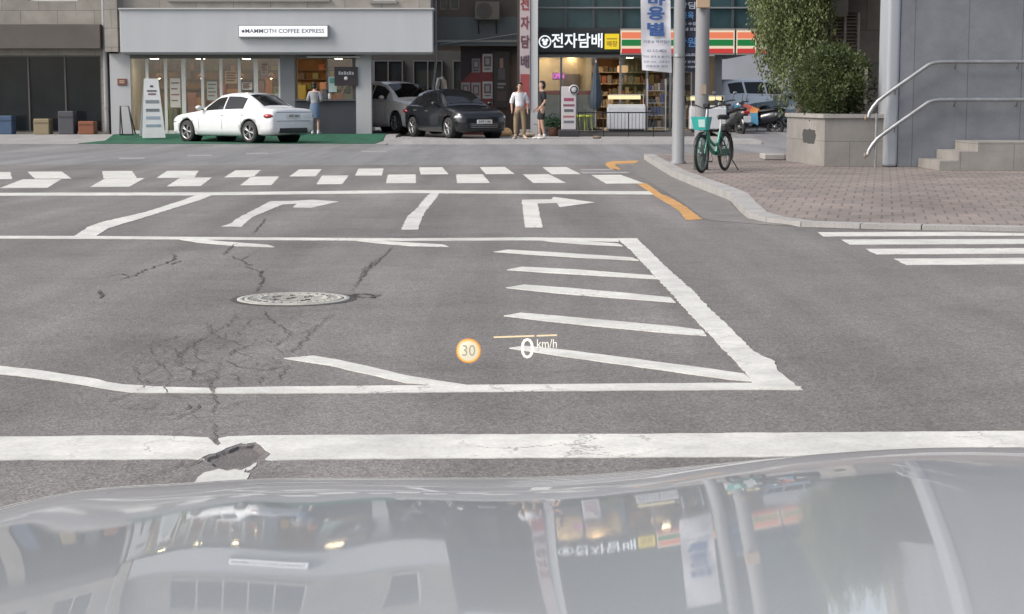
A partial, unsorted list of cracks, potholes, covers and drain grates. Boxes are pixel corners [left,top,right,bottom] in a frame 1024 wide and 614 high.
crack [107,309,337,481]
crack [223,219,270,291]
crack [350,247,391,297]
crack [98,254,181,298]
pothole [207,445,266,470]
manhole cover [230,292,357,306]
